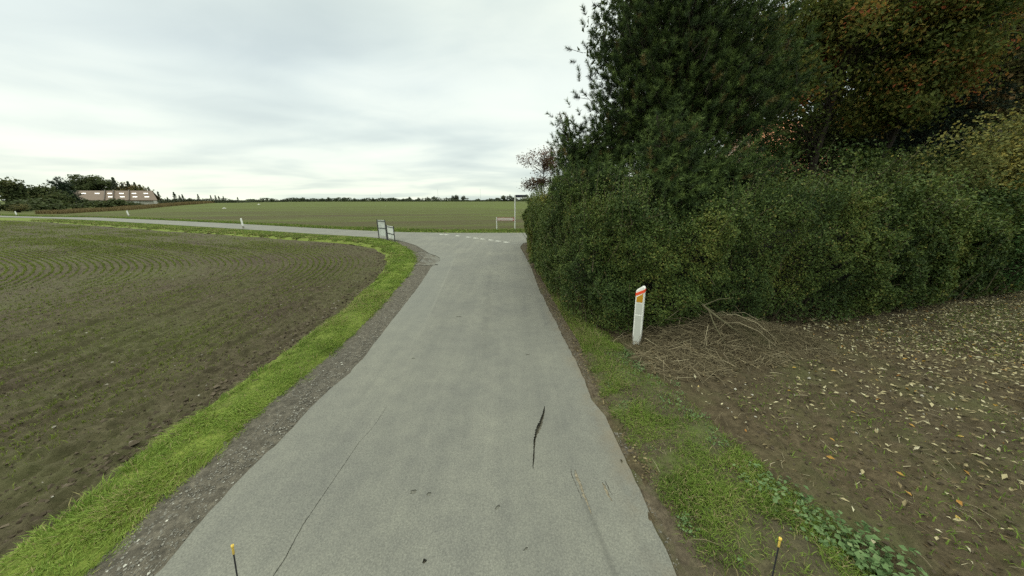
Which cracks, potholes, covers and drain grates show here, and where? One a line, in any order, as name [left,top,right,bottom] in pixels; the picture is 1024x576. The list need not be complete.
crack [533,407,545,465]
